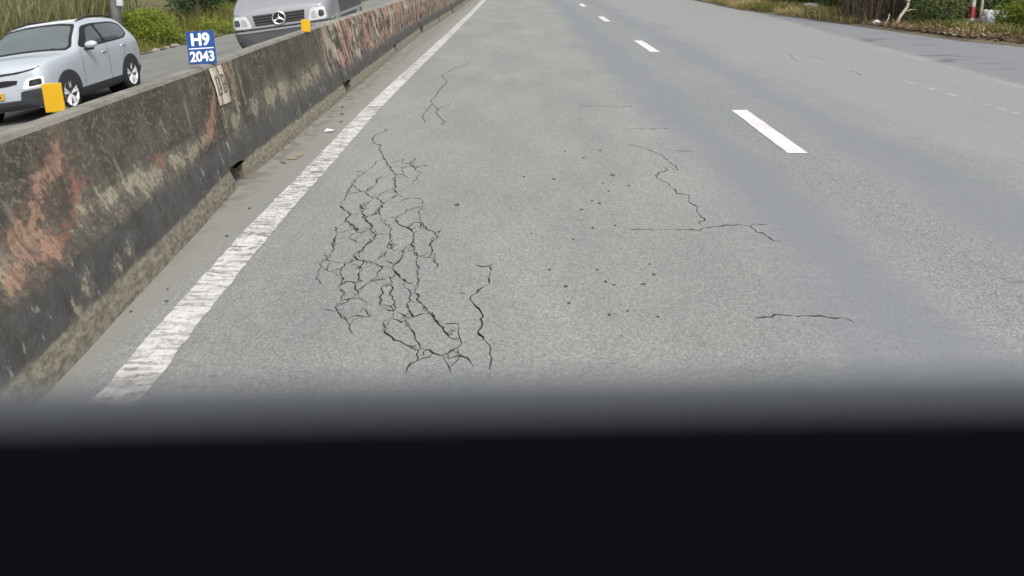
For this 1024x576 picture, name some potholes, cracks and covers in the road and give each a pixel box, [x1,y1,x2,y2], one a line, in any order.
crack [757,314,853,322]
crack [315,129,493,375]
crack [422,64,466,125]
crack [632,145,774,241]
